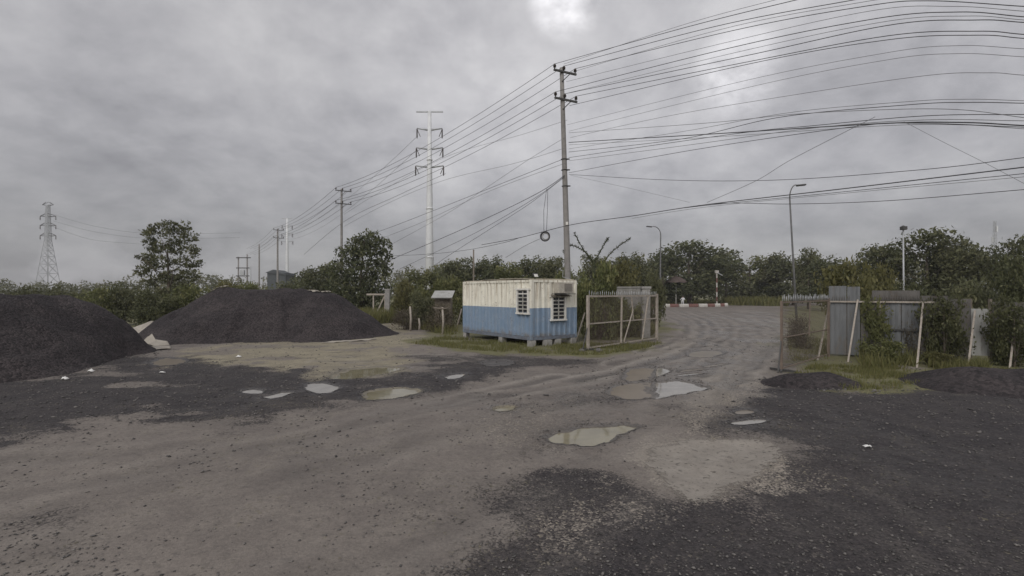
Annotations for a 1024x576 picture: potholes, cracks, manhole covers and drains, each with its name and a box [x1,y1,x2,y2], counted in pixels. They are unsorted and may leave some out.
pothole [619,366,655,382]
pothole [261,391,294,399]
pothole [726,417,769,425]
pothole [653,367,672,377]
pothole [603,381,657,400]
pothole [301,382,342,394]
pothole [541,421,642,447]
pothole [651,379,711,399]
pothole [362,387,424,400]
